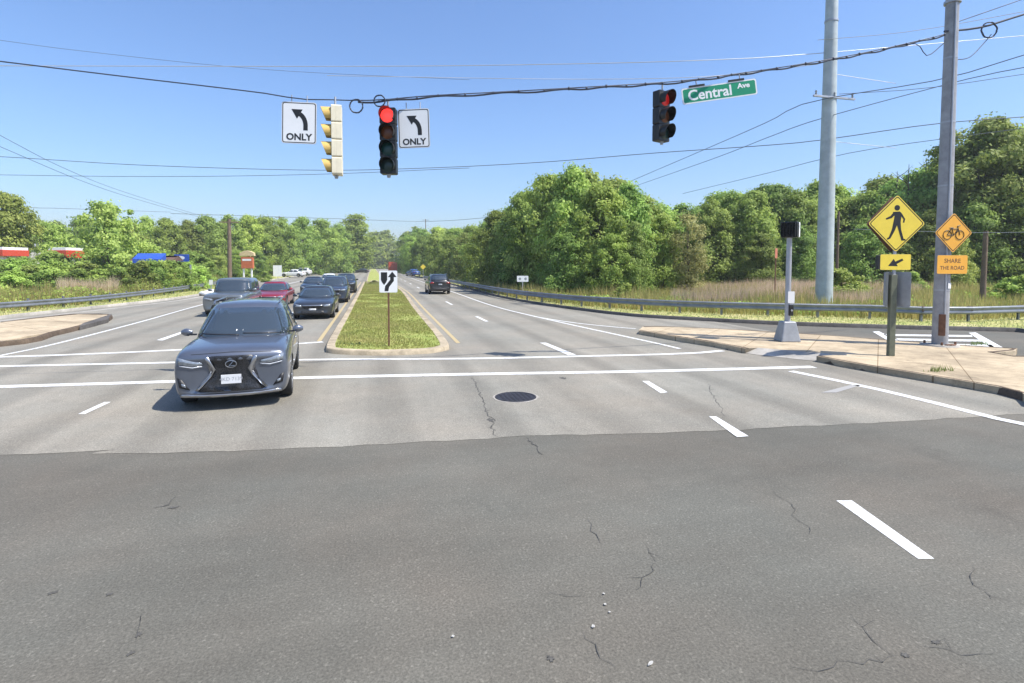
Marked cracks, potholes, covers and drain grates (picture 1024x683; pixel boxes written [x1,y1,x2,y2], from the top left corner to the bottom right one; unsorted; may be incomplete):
manhole cover [493,391,539,403]
crack [788,619,895,671]
crack [471,378,496,436]
